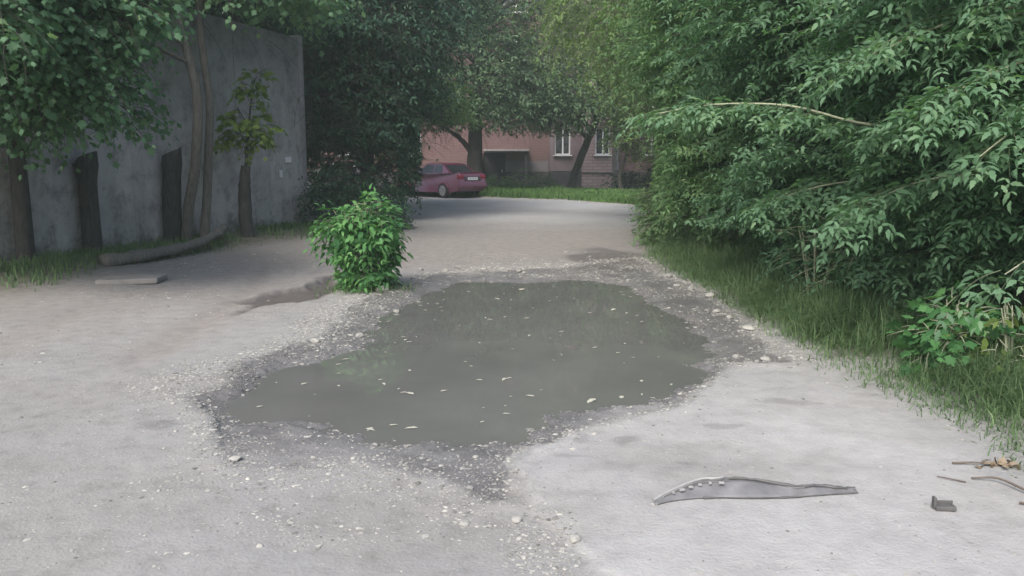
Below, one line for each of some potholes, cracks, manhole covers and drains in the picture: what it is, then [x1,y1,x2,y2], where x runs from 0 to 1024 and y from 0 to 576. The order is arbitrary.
pothole [180,258,804,514]
